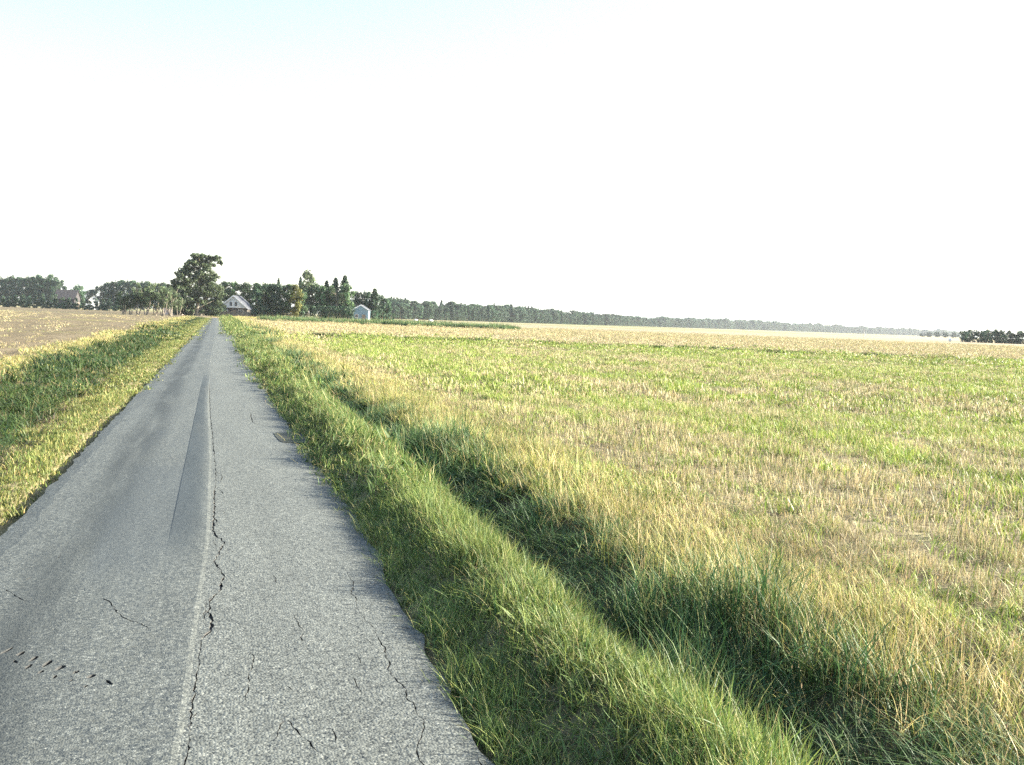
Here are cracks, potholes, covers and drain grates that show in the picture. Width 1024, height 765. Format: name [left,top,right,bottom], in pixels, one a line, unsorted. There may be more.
crack [343,566,425,765]
crack [104,599,153,630]
crack [275,720,337,753]
crack [184,384,225,765]
